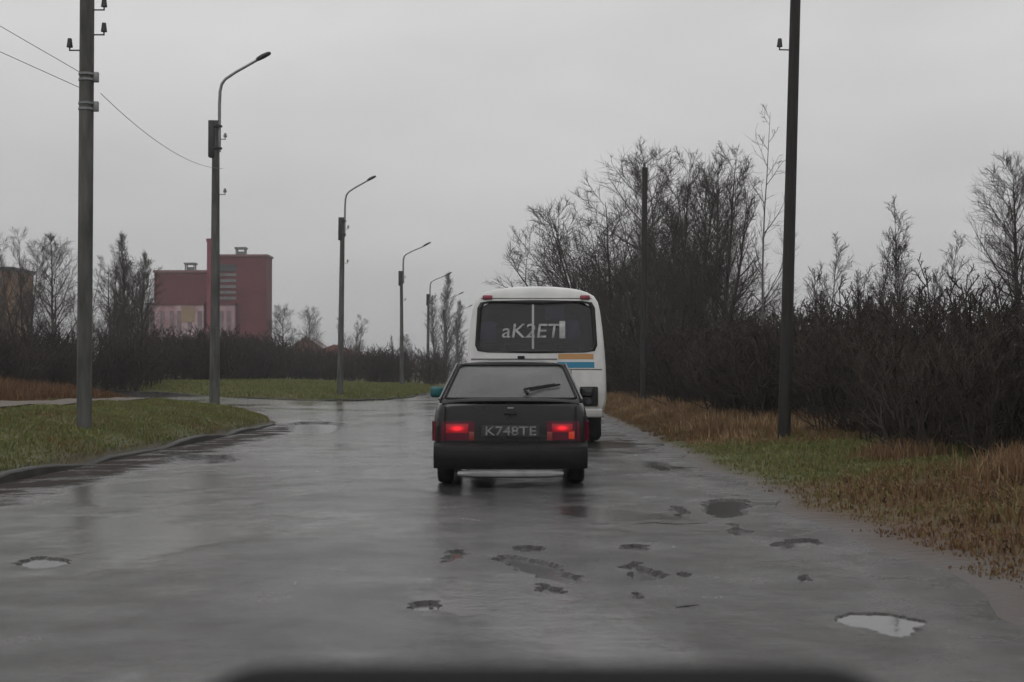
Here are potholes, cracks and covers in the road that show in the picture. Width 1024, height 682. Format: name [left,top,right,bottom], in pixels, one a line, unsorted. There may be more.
pothole [534,583,568,594]
pothole [489,554,585,584]
pothole [700,499,754,518]
pothole [11,556,72,569]
pothole [617,560,670,581]
pothole [769,538,824,549]
pothole [439,549,470,566]
pothole [834,612,930,637]
pothole [668,506,691,518]
pothole [406,600,443,611]
